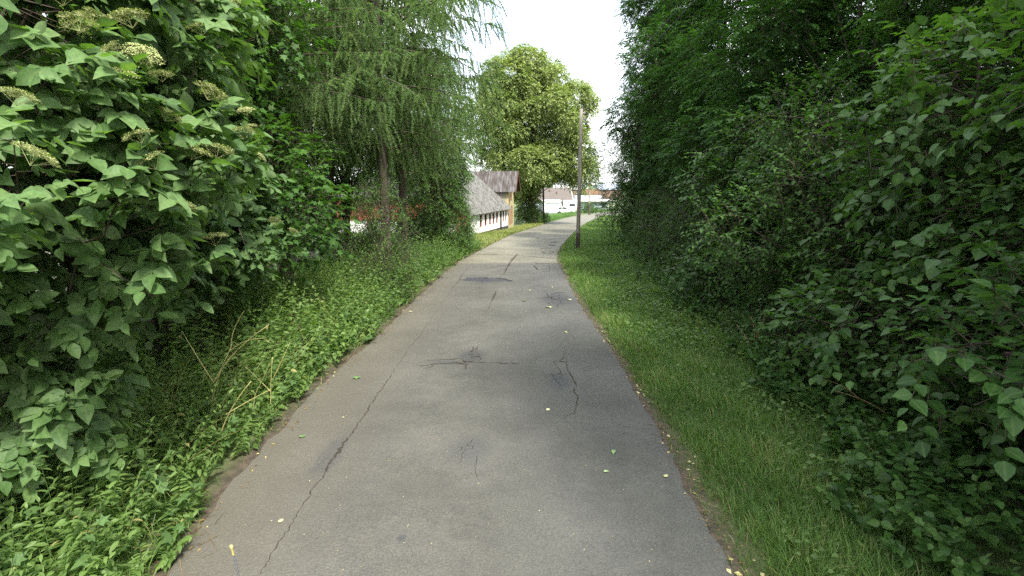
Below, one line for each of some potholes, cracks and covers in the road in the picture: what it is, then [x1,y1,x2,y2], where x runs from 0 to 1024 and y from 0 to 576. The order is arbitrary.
crack [552,351,579,419]
crack [484,238,555,310]
crack [260,265,516,574]
